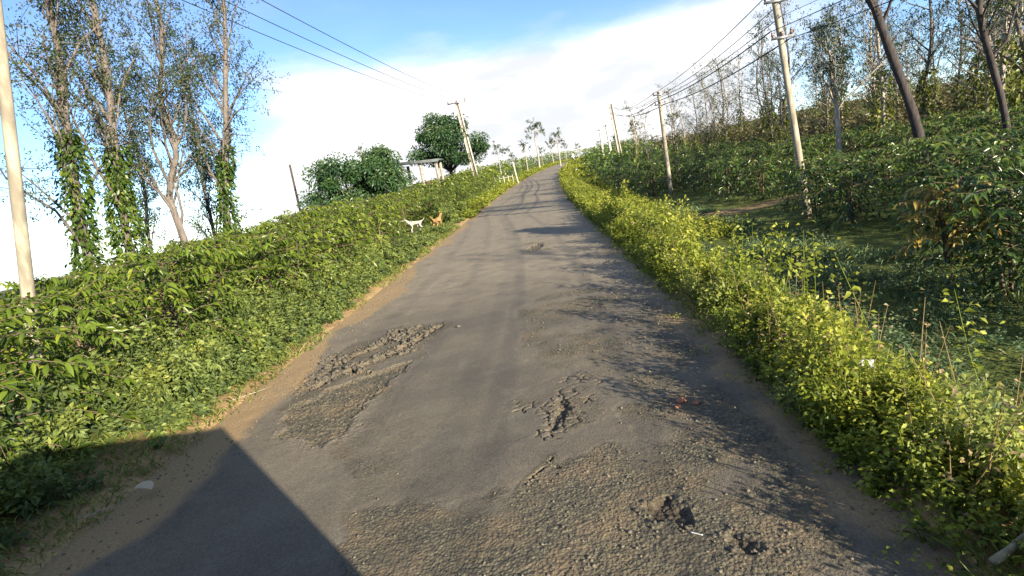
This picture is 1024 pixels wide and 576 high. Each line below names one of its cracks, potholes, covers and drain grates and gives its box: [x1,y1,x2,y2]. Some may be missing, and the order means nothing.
pothole [721,529,769,556]
pothole [639,493,699,533]
crack [506,393,598,483]
pothole [544,397,574,434]
